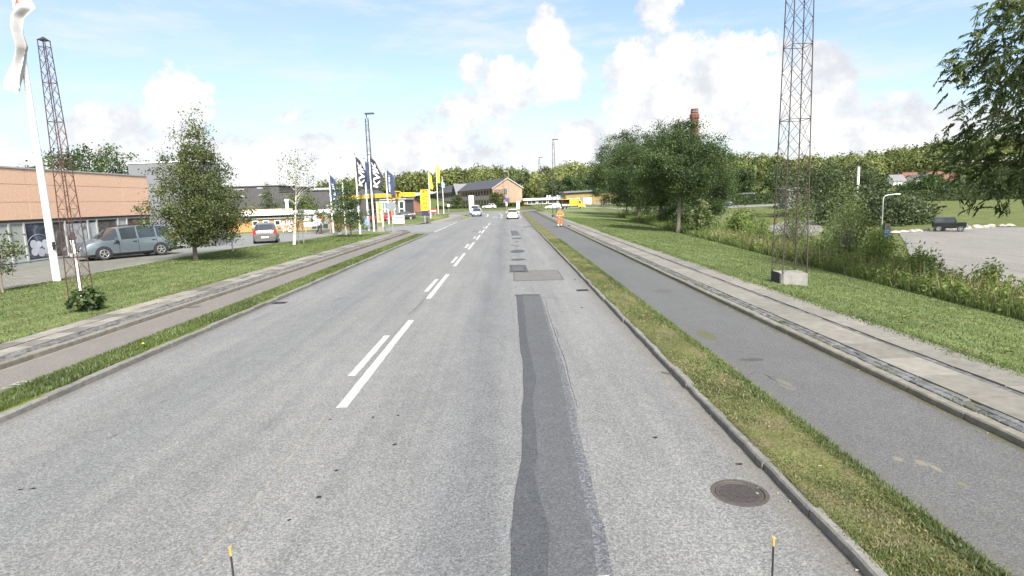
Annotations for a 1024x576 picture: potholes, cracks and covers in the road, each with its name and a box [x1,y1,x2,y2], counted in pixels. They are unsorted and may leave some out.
manhole cover [710,479,770,507]
